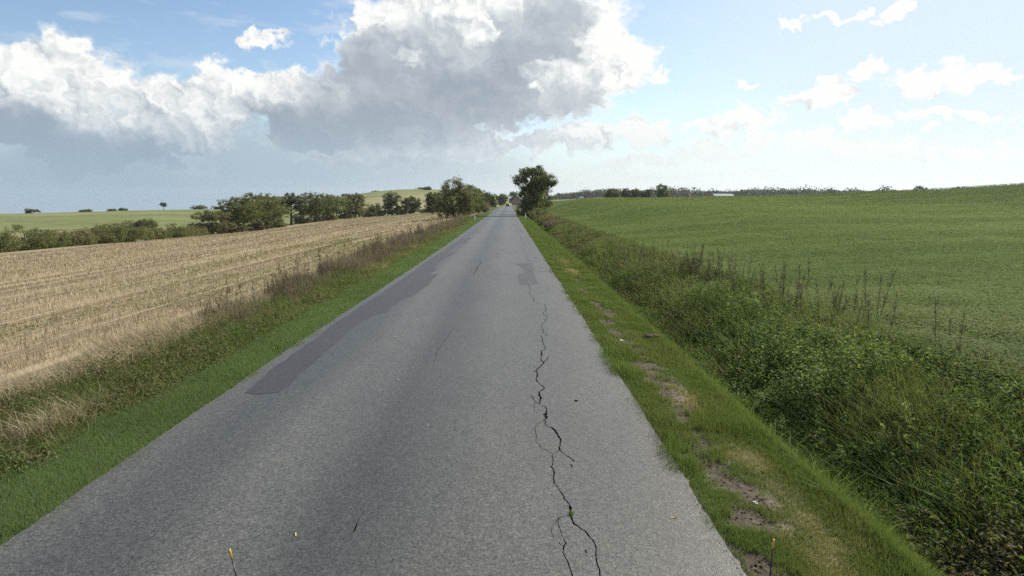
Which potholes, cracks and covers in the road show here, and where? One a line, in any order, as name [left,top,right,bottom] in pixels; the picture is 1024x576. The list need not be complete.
crack [529,286,601,576]
